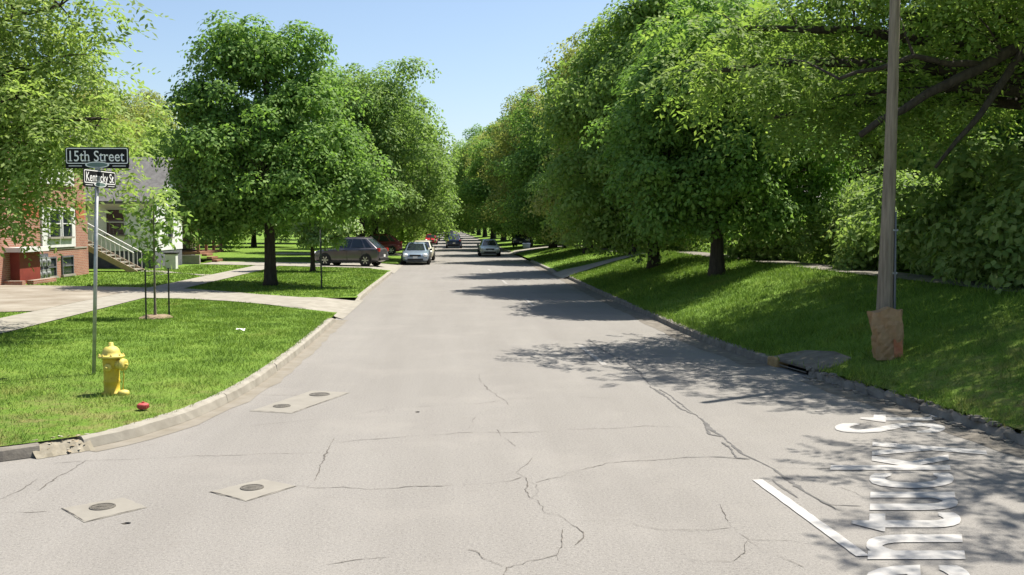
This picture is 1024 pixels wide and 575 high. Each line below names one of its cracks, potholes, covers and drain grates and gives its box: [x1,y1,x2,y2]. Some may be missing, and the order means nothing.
drain grate [767,350,851,375]
manhole cover [89,503,116,511]
crack [1,420,802,575]
